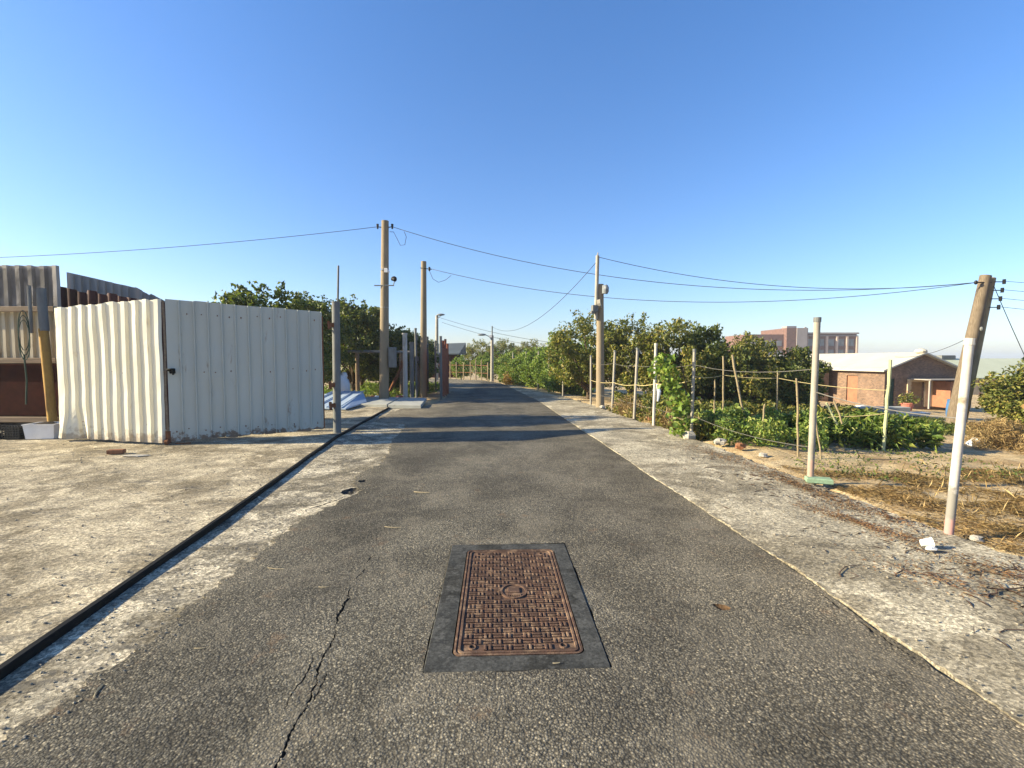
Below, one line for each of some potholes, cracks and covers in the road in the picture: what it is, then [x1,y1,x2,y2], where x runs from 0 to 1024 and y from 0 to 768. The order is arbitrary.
crack [274,556,373,768]
manhole cover [423,543,611,673]
